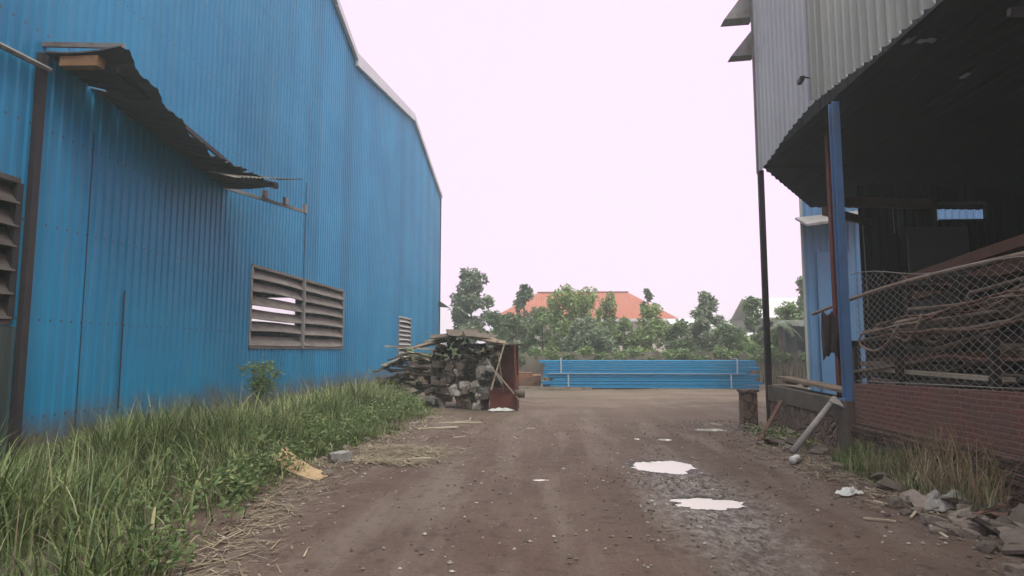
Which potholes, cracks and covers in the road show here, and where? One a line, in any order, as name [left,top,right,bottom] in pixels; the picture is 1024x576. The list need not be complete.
pothole [646,493,772,518]
pothole [611,458,718,480]
